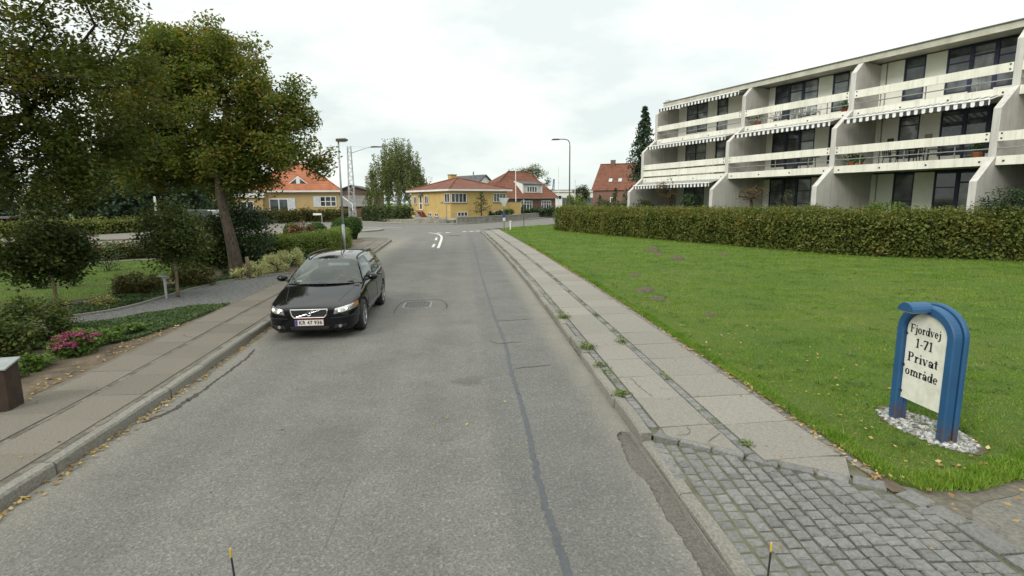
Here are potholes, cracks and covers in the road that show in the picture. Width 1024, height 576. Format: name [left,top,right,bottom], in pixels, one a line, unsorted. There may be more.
crack [144,349,255,422]
